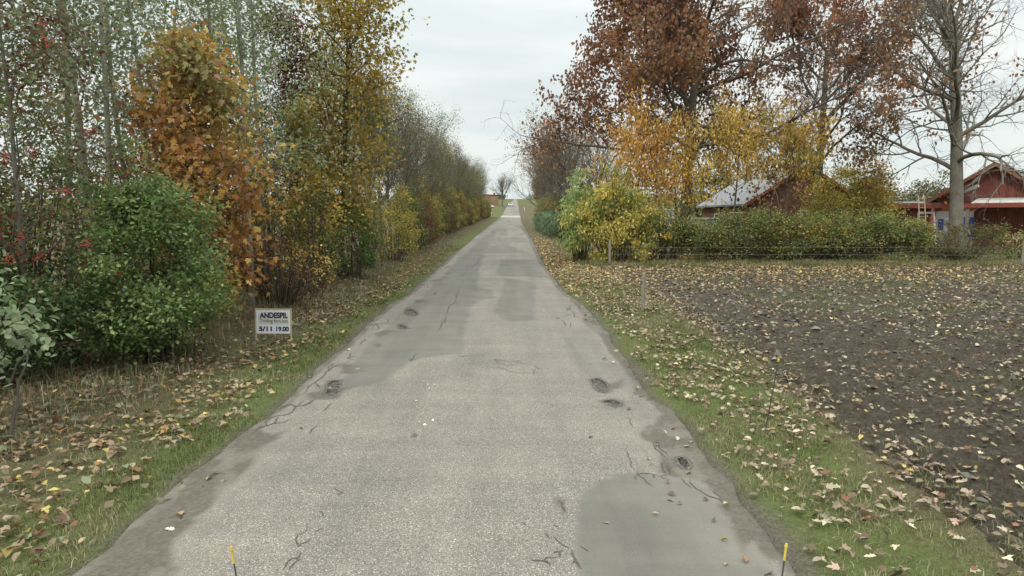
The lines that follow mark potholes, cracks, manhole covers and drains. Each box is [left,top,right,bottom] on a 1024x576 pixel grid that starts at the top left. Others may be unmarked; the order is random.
crack [625,442,723,501]
pothole [588,378,610,394]
pothole [322,380,342,397]
crack [252,318,389,434]
pothole [674,456,693,470]
crack [531,500,588,568]
pothole [598,399,624,408]
crack [283,511,324,569]
